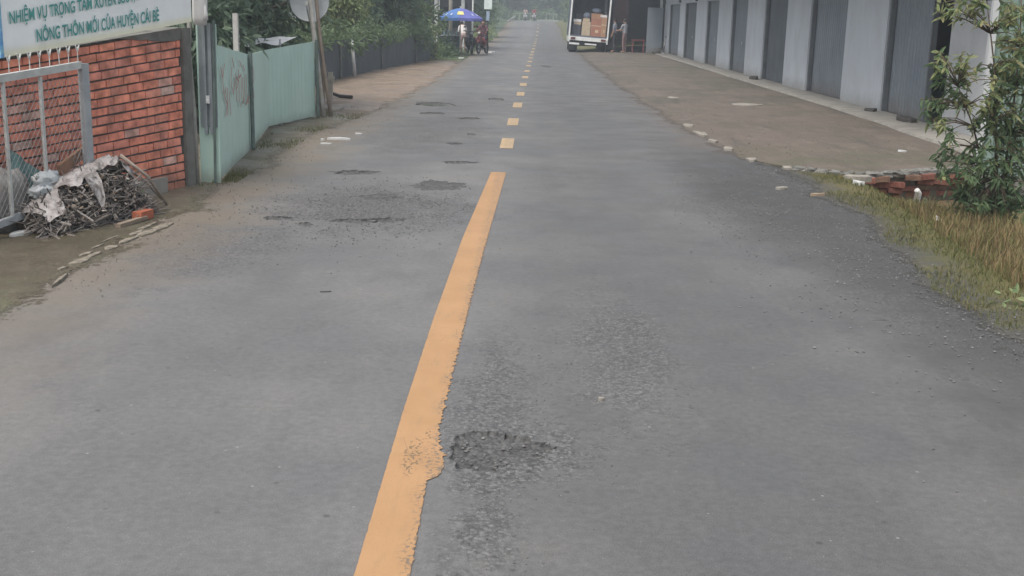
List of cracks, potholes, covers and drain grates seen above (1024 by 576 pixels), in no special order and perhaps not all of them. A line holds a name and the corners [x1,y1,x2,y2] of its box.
pothole [448,430,559,472]
pothole [410,179,467,190]
